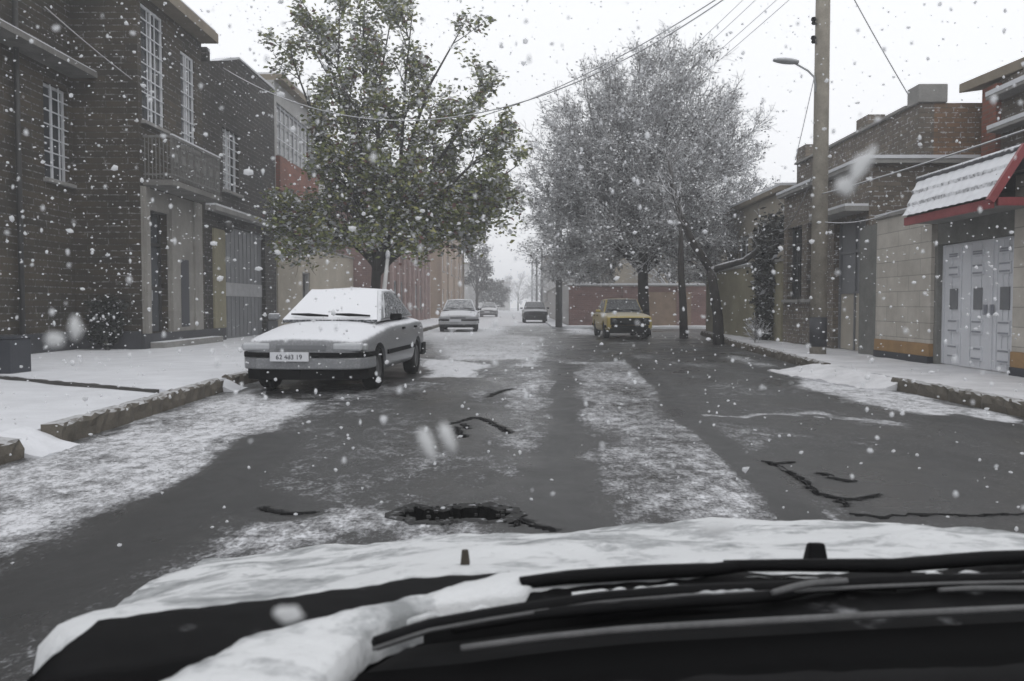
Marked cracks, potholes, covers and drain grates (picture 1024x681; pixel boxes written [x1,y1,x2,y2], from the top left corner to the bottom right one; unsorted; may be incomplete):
crack [259,506,316,515]
crack [448,417,511,438]
crack [761,460,1024,519]
crack [487,388,513,397]
pothole [385,502,528,526]
